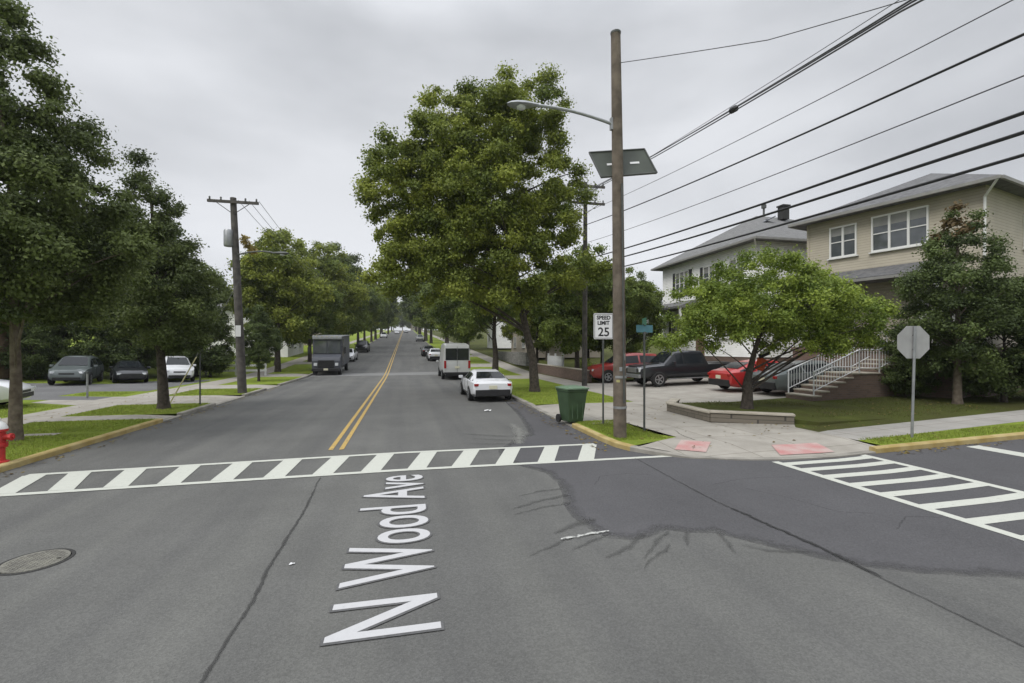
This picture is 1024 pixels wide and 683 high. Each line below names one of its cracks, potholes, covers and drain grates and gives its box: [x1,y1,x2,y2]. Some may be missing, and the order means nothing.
crack [200,478,321,683]
crack [638,459,729,507]
manhole cover [0,548,76,576]
